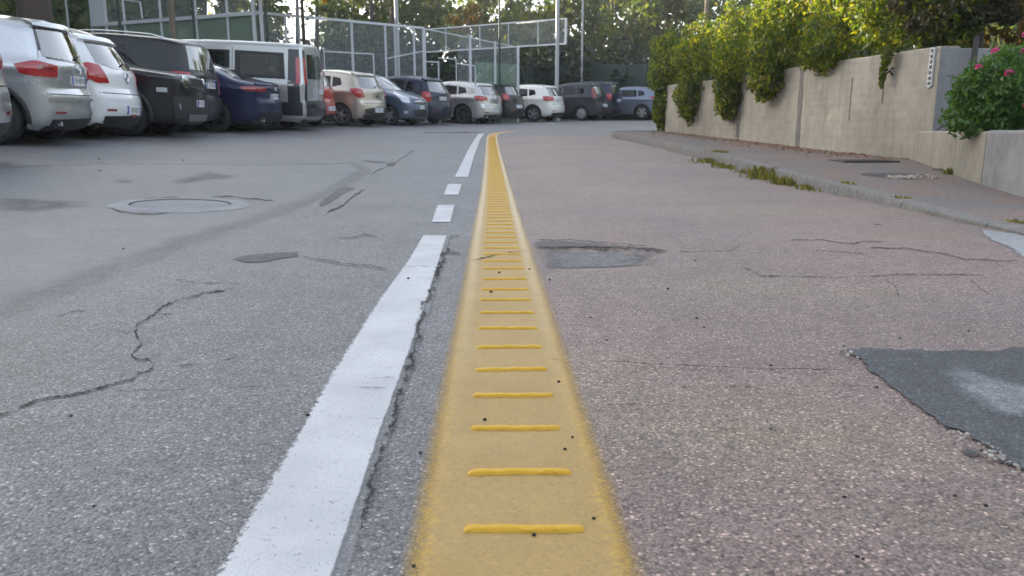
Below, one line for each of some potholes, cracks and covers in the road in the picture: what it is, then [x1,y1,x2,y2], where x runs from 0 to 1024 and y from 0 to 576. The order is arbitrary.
crack [0,281,235,415]
manhole cover [106,198,251,213]
crack [792,224,1008,297]
crack [357,235,510,534]
crack [608,361,863,386]
